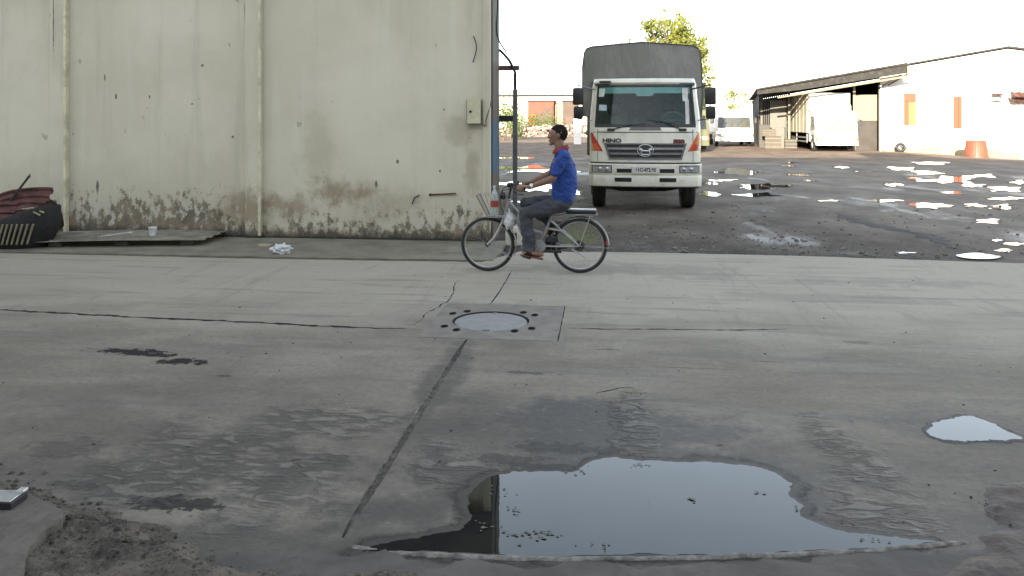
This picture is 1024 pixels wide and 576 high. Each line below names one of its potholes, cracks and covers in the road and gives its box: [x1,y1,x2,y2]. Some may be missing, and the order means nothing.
crack [0,281,458,329]
manhole cover [419,303,566,342]
